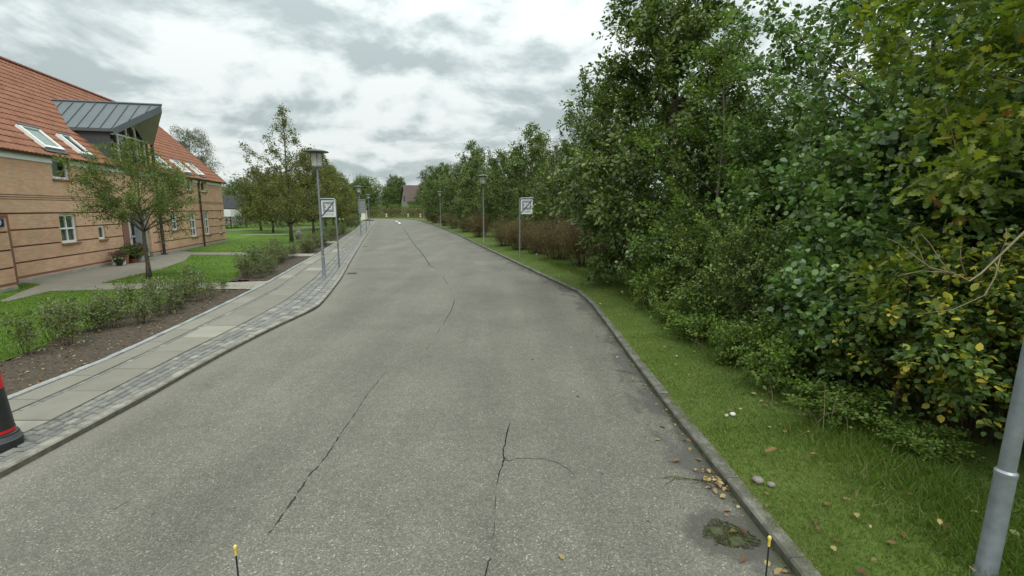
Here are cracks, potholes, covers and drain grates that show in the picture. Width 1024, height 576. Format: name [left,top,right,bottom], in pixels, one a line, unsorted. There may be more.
crack [491,423,576,541]
crack [400,224,455,361]
crack [249,371,386,556]
